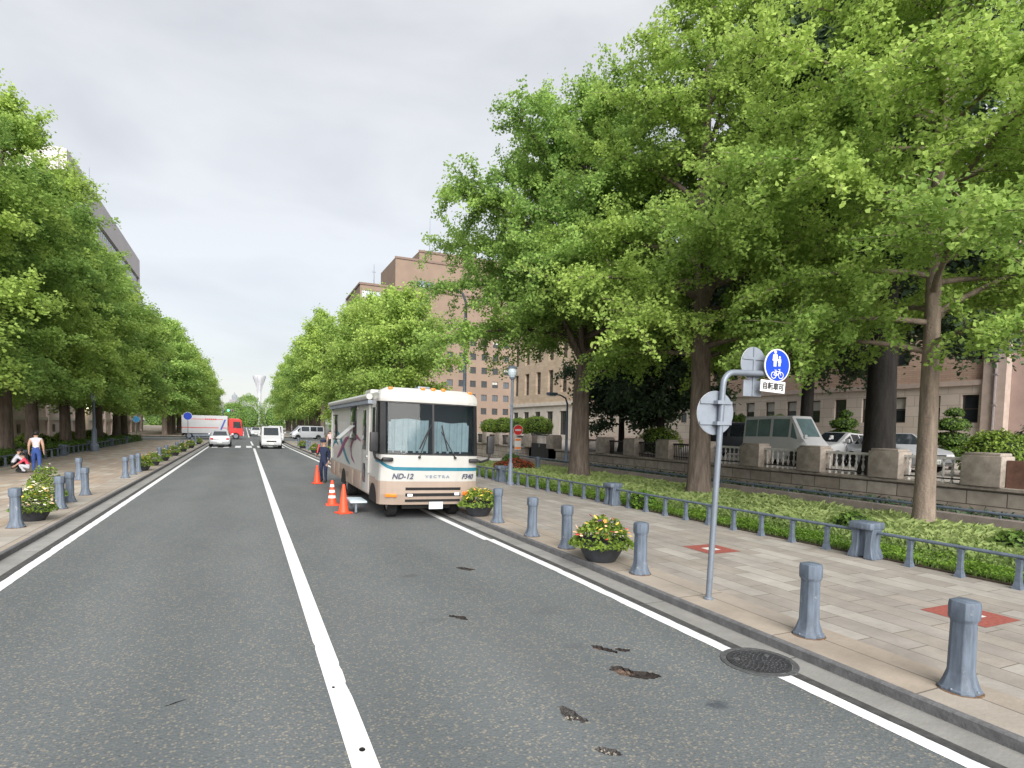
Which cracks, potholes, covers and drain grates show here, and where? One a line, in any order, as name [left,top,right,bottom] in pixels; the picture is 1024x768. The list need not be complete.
pothole [558,705,588,723]
pothole [595,746,623,756]
manhole cover [720,647,800,677]
pothole [609,666,661,680]
